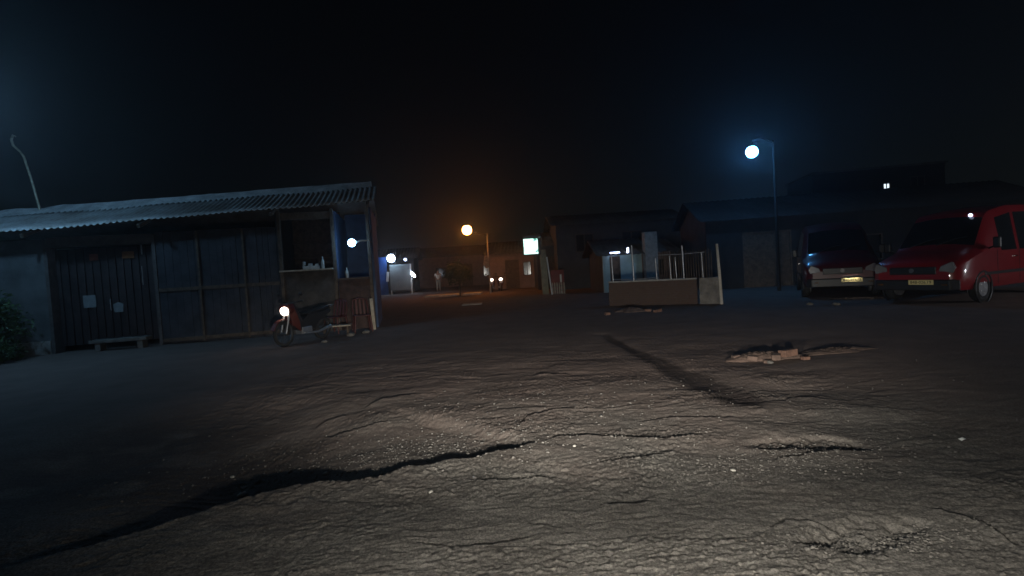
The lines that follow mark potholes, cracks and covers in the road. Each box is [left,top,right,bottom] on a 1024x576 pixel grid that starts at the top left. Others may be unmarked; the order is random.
crack [927,505,1024,548]
crack [519,405,740,464]
crack [408,532,544,550]
pothole [785,513,944,556]
